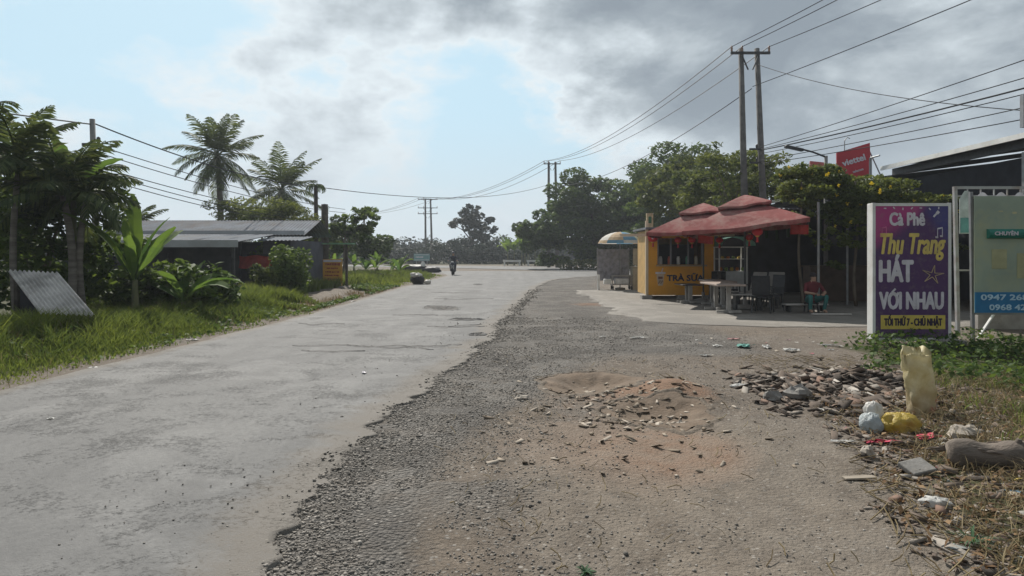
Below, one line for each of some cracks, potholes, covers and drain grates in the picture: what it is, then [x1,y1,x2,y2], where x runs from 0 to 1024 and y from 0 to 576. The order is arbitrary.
crack [292,292,494,353]
